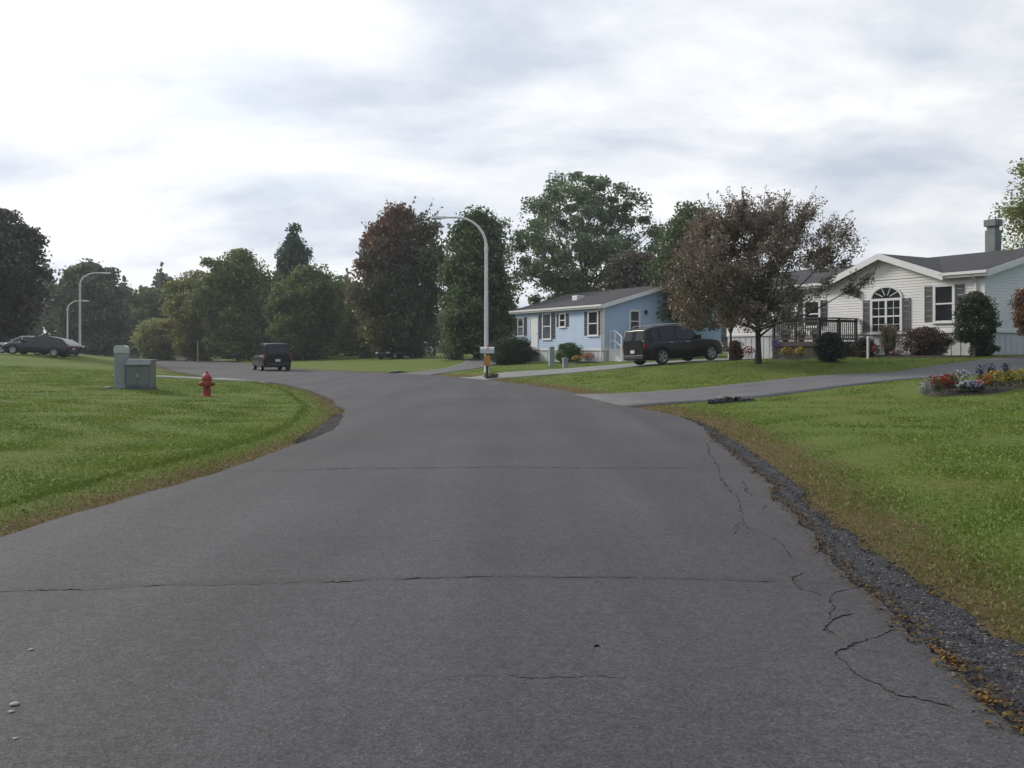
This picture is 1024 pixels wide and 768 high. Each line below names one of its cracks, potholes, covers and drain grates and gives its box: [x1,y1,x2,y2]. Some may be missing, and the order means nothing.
crack [274,444,966,714]
crack [3,576,767,592]
